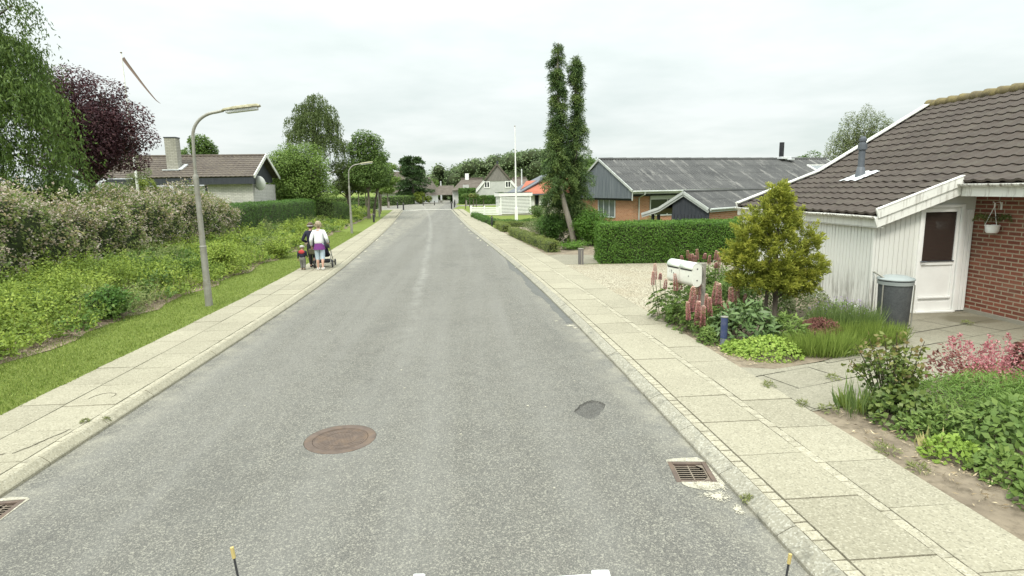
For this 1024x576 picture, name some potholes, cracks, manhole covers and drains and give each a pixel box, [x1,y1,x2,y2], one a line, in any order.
manhole cover [304,425,376,454]
drain grate [0,499,26,519]
drain grate [668,462,717,482]
